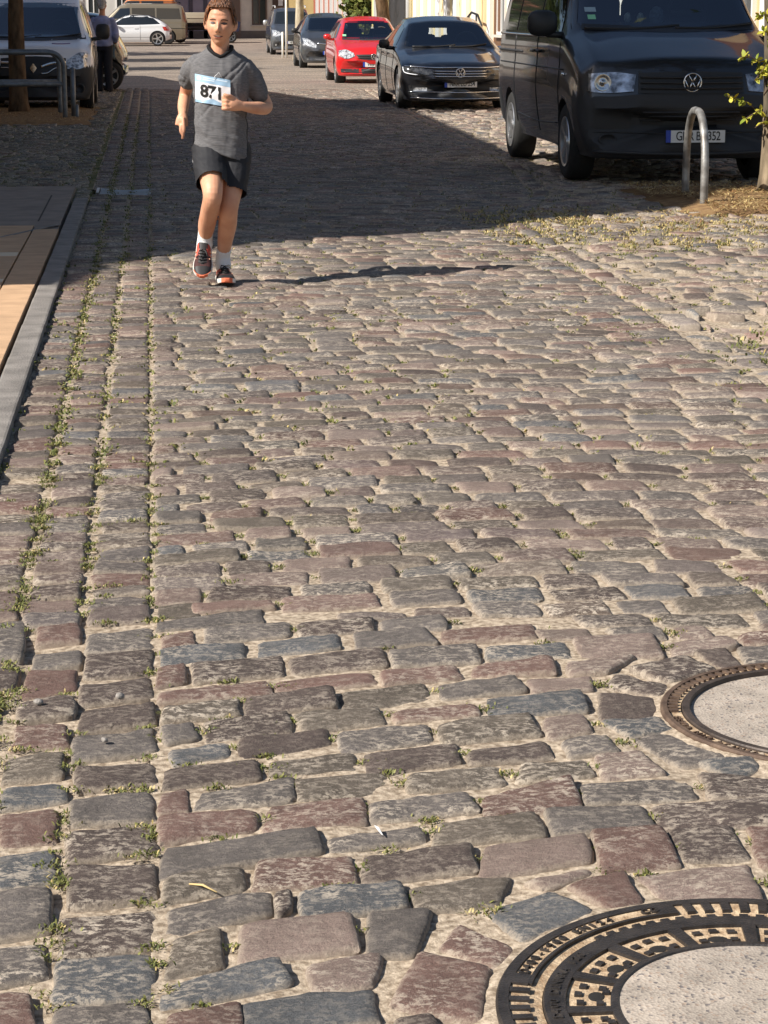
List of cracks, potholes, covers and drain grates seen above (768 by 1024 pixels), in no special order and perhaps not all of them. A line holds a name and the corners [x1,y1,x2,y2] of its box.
manhole cover [495,898,768,1024]
manhole cover [660,662,768,761]
